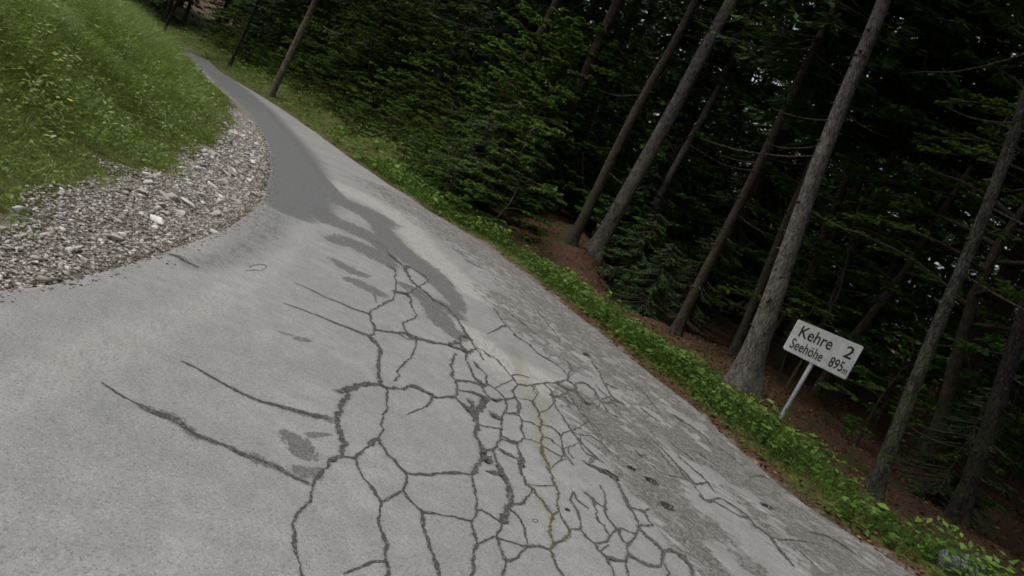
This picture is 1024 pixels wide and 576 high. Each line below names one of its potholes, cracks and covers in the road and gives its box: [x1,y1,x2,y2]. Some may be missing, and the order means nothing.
crack [102,232,854,576]
